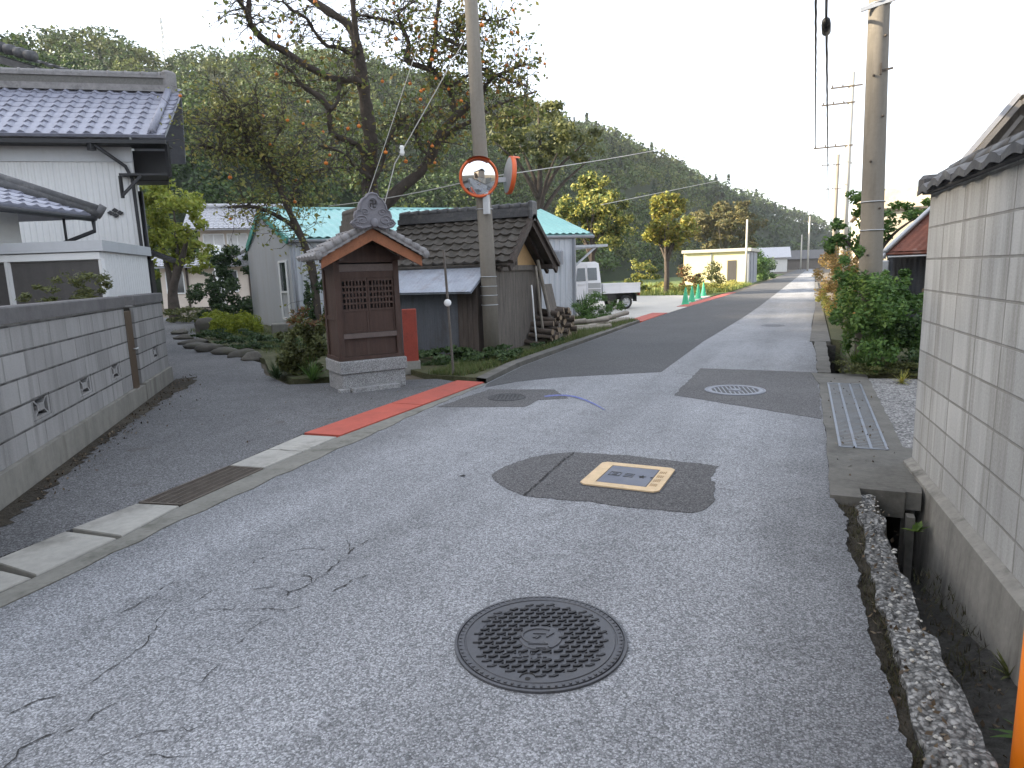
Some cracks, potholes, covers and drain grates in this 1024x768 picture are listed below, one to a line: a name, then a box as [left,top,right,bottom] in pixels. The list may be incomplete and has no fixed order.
manhole cover [487,393,526,401]
crack [4,701,119,768]
crack [6,535,369,716]
crack [89,726,224,764]
manhole cover [455,596,628,694]
drain grate [139,466,263,507]
drain grate [827,383,889,450]
utility cover [579,462,676,494]
